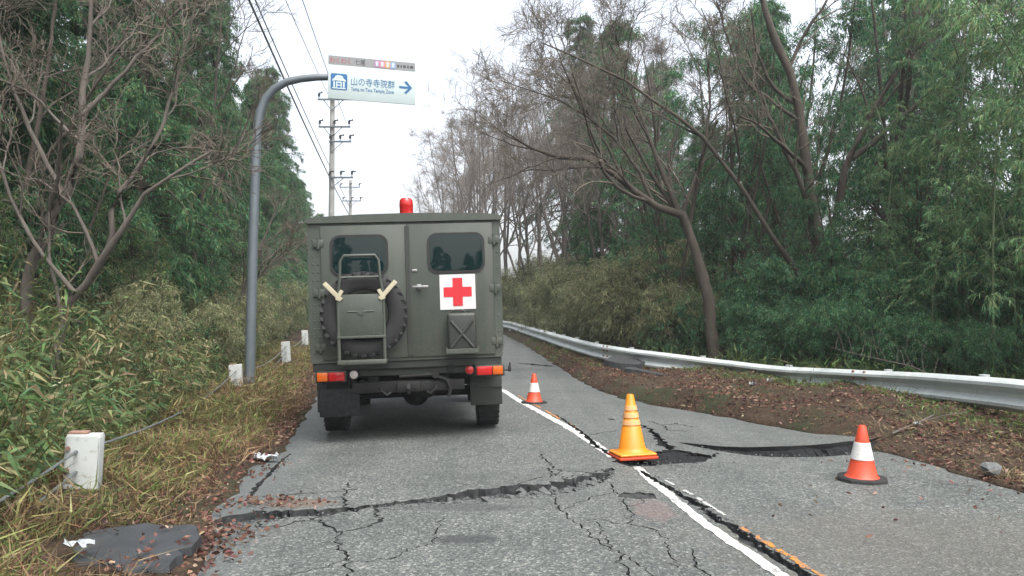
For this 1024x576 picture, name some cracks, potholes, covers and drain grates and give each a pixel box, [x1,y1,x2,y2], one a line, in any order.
crack [215,415,884,576]
